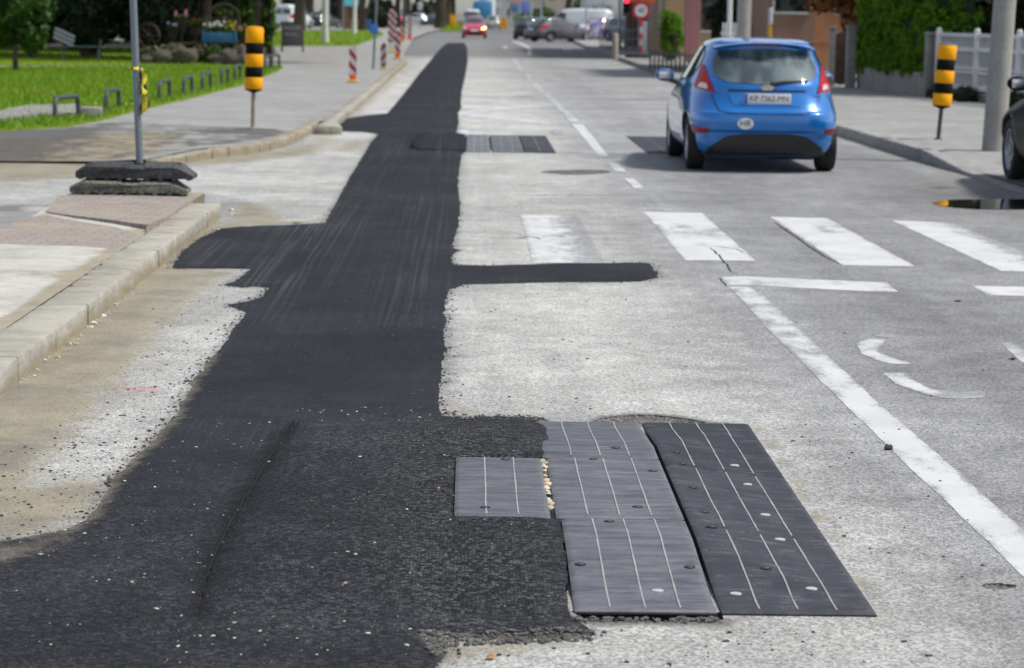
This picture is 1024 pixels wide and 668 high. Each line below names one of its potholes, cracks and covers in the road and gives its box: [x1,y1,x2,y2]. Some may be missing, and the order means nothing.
crack [710,246,744,286]
